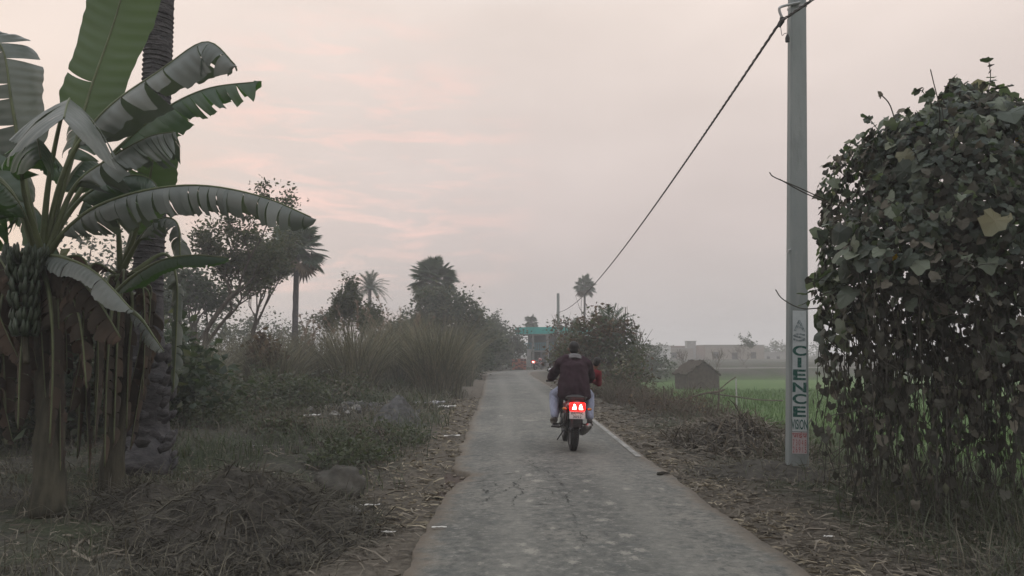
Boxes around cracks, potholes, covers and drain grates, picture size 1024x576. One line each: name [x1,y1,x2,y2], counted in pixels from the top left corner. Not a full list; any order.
crack [480,461,587,547]
